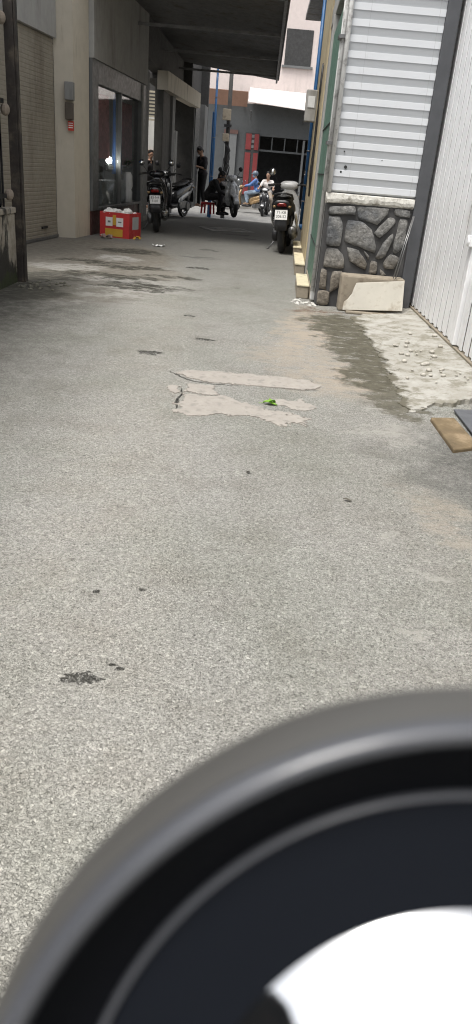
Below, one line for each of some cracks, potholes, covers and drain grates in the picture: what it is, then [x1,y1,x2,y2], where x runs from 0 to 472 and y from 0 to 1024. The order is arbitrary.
crack [170,372,235,408]
pothole [58,671,106,685]
